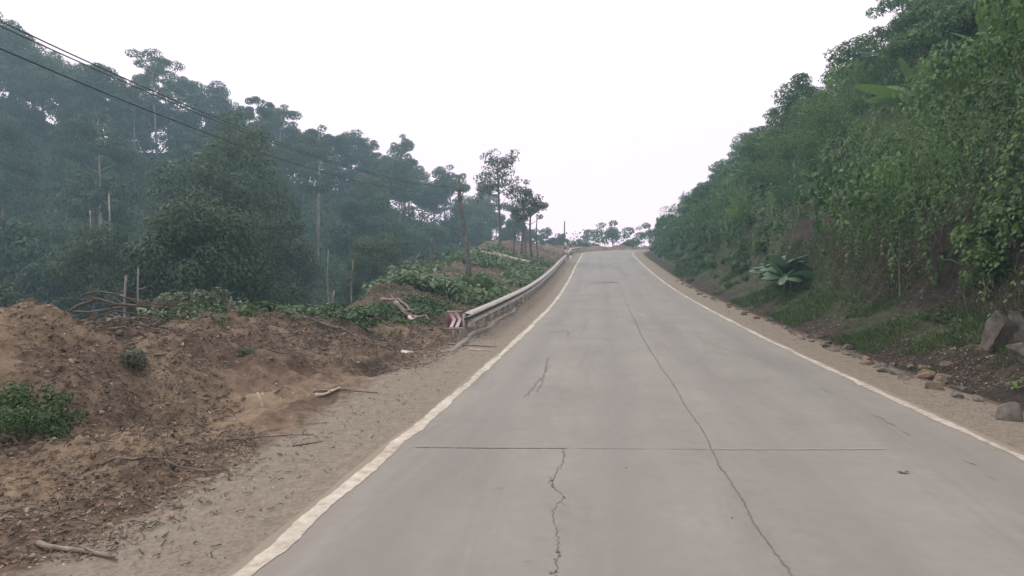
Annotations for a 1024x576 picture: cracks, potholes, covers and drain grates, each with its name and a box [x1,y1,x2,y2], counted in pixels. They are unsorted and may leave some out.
crack [524,358,552,396]
crack [549,449,565,576]
